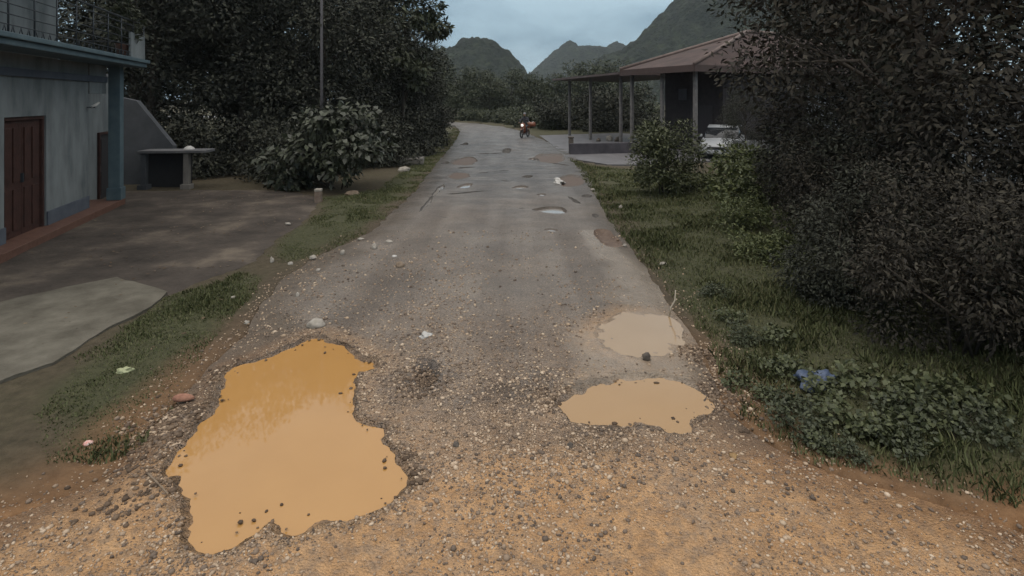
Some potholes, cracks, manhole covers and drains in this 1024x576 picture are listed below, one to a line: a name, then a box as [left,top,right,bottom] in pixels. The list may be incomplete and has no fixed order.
pothole [593,311,685,358]
pothole [449,157,478,165]
pothole [160,334,413,555]
pothole [533,153,565,163]
pothole [532,206,567,214]
pothole [554,373,715,435]
pothole [559,174,585,187]
pothole [594,229,622,247]
pothole [412,358,445,391]
